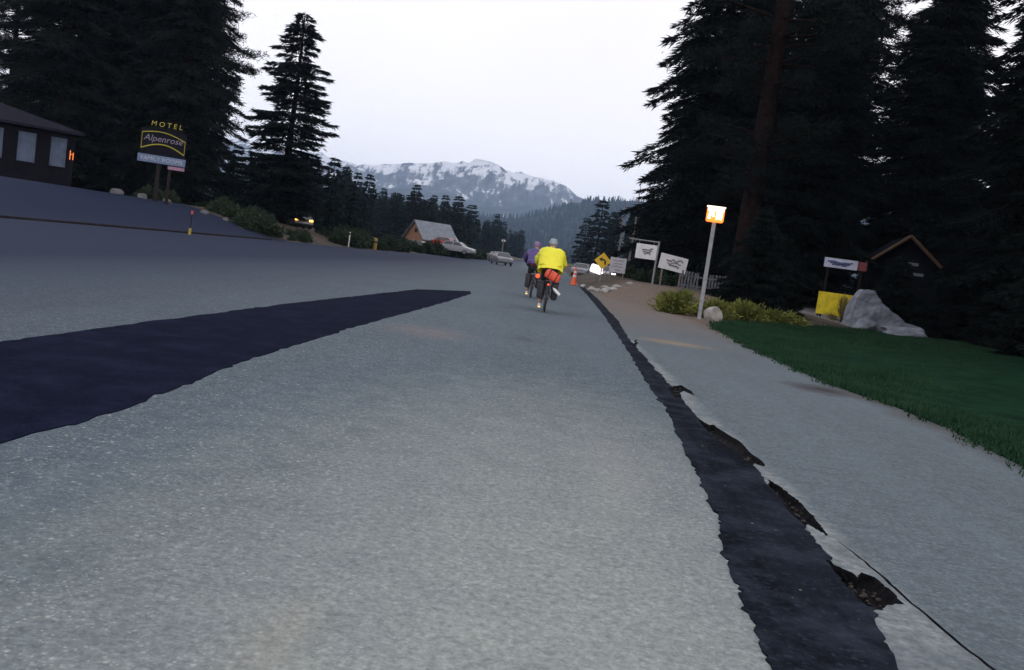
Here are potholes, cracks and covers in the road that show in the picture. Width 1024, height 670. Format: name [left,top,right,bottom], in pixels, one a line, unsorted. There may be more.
pothole [827,560,904,610]
pothole [669,385,695,398]
crack [841,543,996,670]
pothole [768,480,828,536]
pothole [698,420,765,466]
